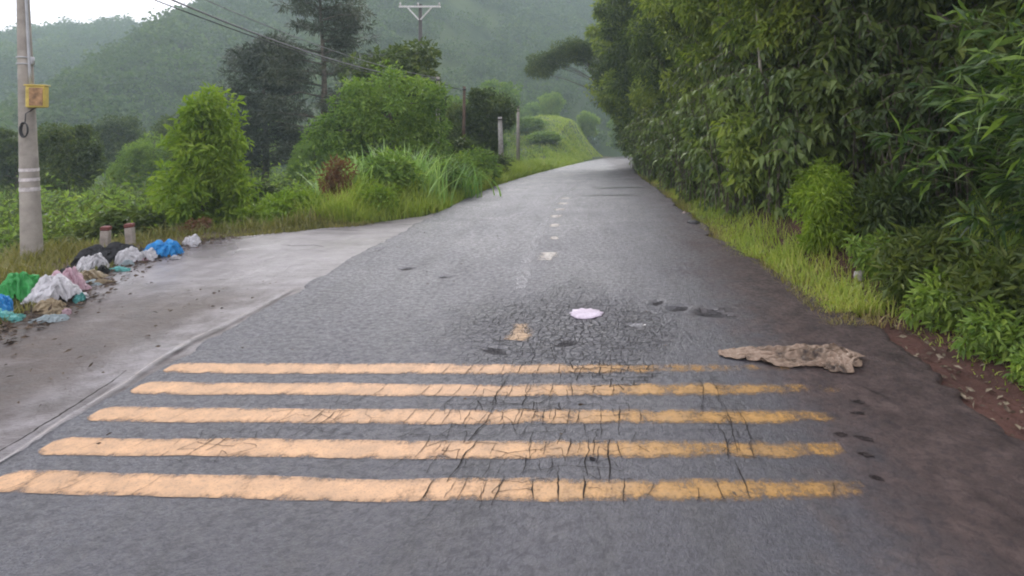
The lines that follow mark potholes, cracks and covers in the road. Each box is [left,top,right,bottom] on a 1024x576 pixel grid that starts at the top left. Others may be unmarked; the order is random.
crack [385,296,675,525]
pothole [482,347,506,355]
crack [692,375,763,499]
